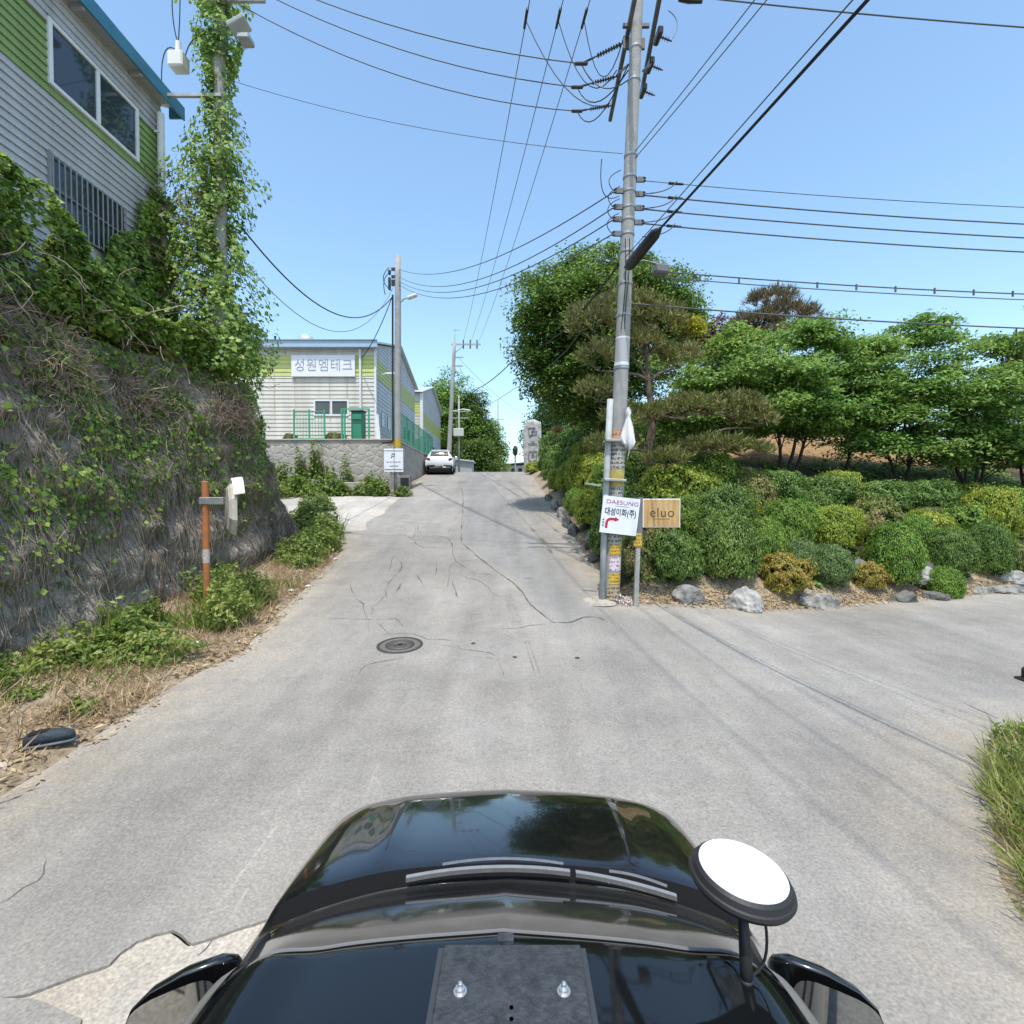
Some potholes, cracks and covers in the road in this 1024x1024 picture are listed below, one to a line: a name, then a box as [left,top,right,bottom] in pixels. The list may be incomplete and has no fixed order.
crack [335,522,495,640]
manhole cover [376,637,423,654]
